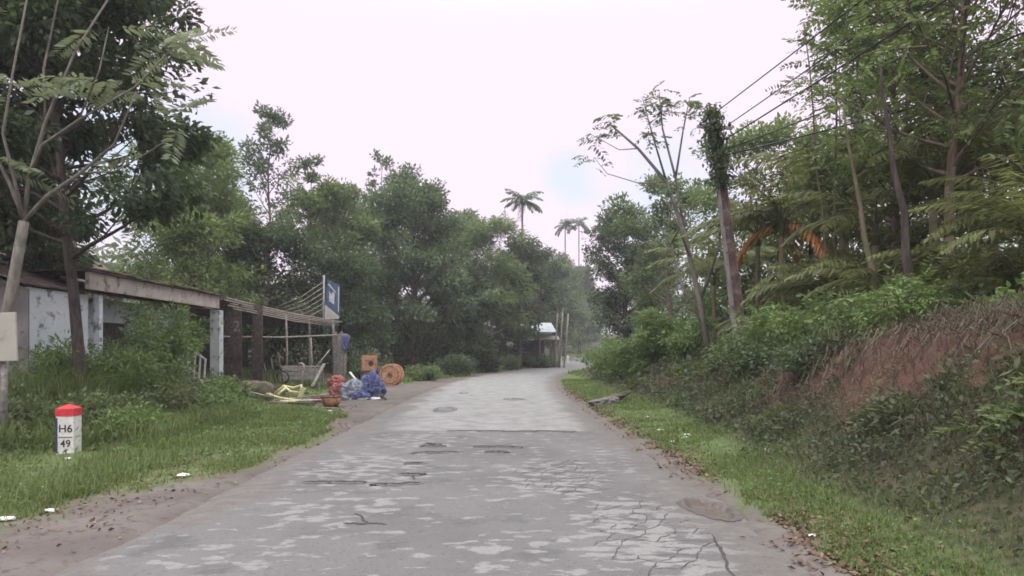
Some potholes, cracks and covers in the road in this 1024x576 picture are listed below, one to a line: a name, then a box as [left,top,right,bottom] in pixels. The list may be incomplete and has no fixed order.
pothole [676,497,744,522]
crack [346,513,384,524]
crack [584,500,735,576]
